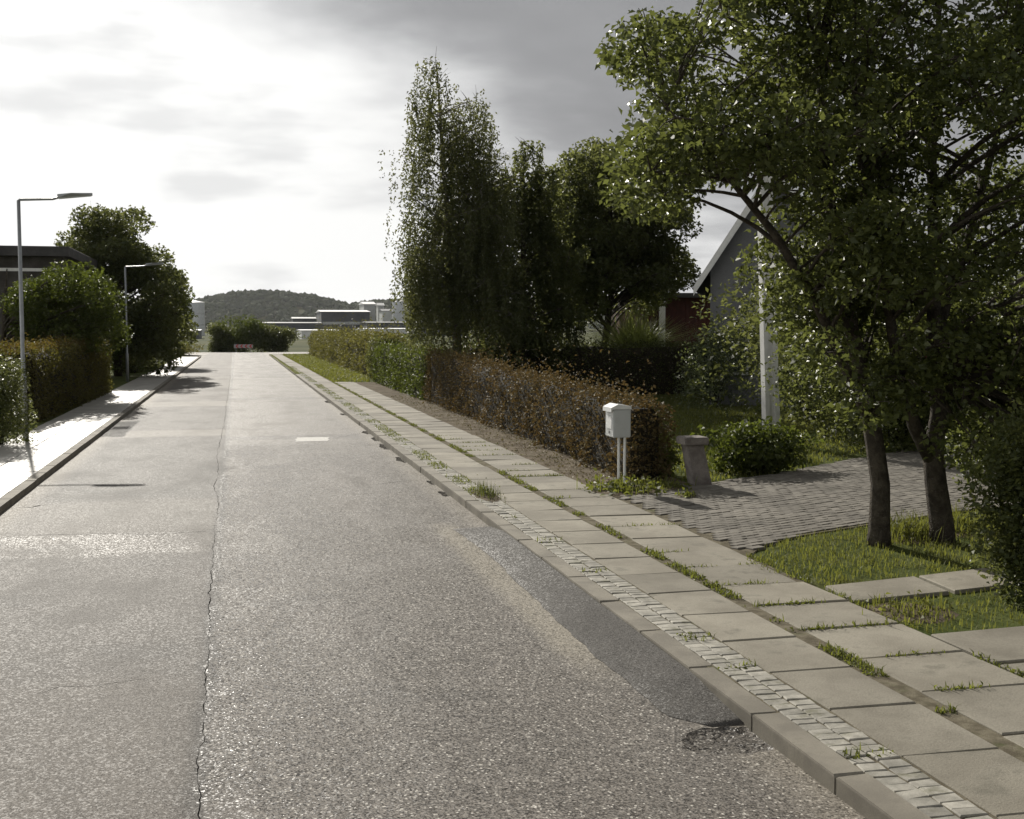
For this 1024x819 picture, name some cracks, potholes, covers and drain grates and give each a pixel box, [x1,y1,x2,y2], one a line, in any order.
pothole [681,726,774,755]
crack [196,393,229,819]
